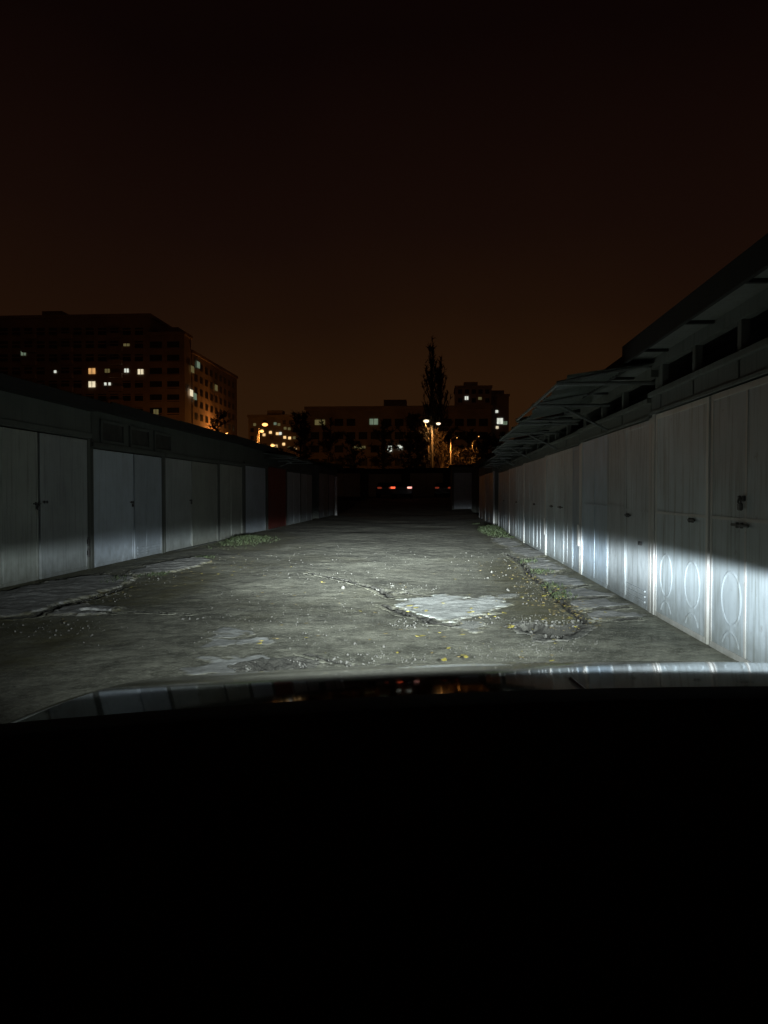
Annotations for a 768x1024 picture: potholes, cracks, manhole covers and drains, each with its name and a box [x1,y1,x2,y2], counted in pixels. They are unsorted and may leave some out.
crack [0,572,199,621]
crack [501,553,648,625]
pothole [502,621,598,643]
crack [304,572,462,627]
